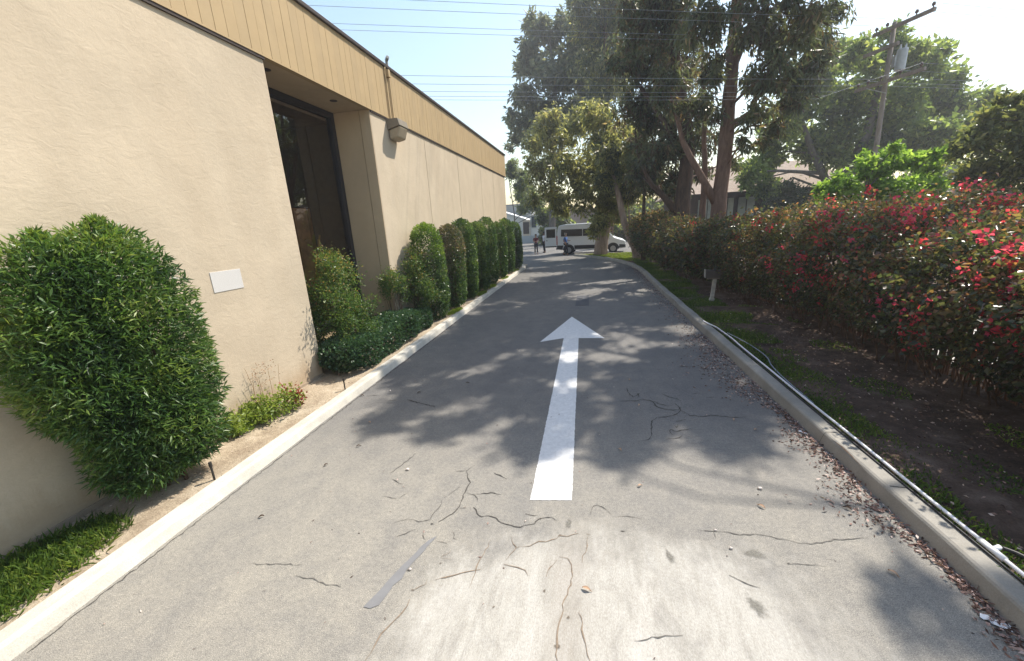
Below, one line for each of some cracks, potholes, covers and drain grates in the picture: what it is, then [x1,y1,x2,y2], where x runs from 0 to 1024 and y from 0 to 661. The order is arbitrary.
crack [703,530,866,544]
crack [627,389,743,440]
crack [365,468,590,661]
crack [255,563,341,587]
